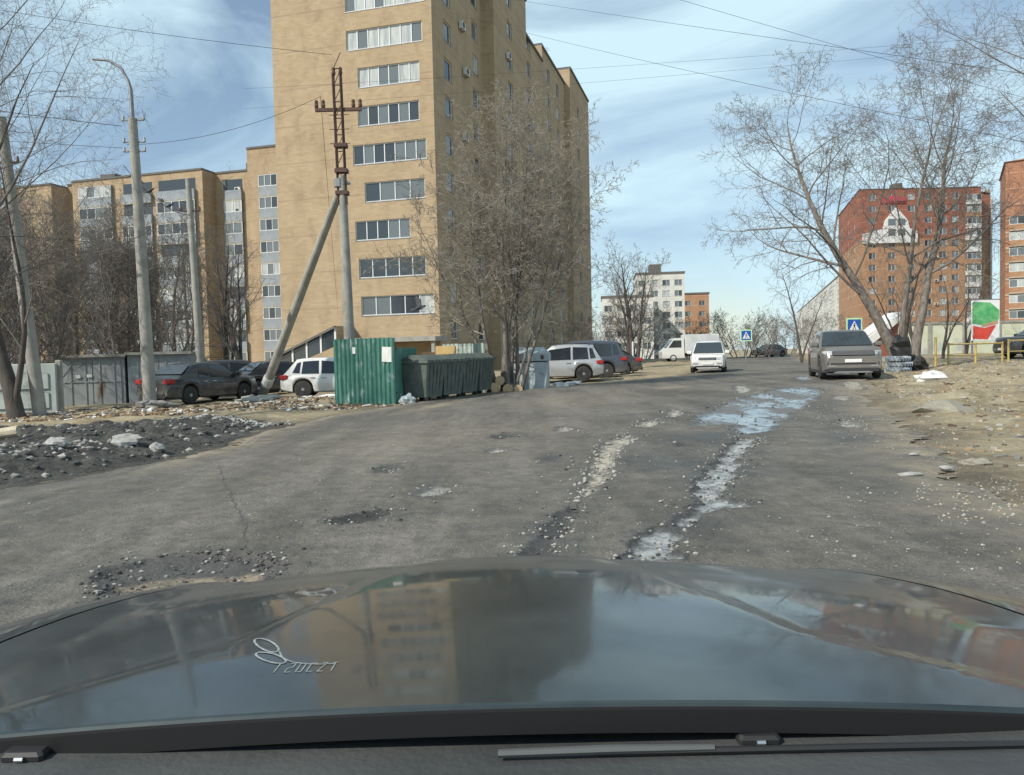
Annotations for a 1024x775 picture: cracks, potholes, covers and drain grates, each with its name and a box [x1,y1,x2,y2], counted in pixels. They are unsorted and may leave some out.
pothole [51,543,316,607]
pothole [528,452,575,465]
pothole [301,505,414,531]
pothole [479,432,529,440]
pothole [356,461,424,476]
crack [219,467,247,541]
pothole [492,500,606,557]
